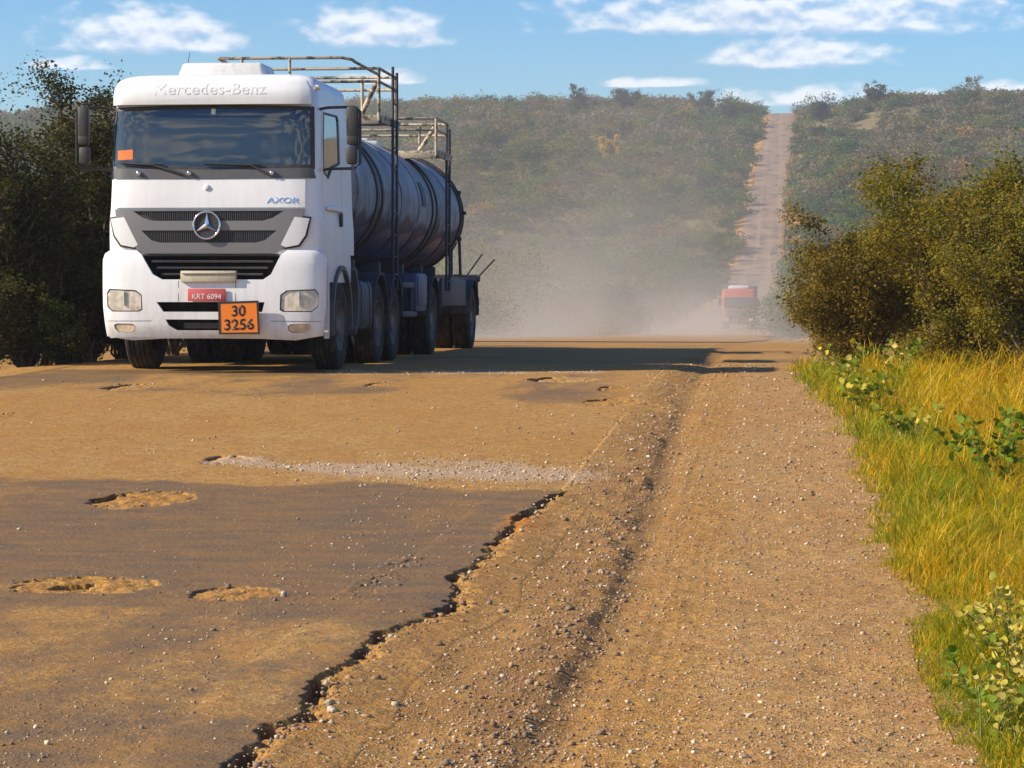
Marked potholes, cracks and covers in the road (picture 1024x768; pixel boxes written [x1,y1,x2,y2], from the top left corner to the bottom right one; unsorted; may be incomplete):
pothole [77,380,178,395]
pothole [579,383,650,395]
pothole [158,583,310,606]
pothole [0,574,190,600]
pothole [507,375,616,385]
pothole [563,396,671,411]
pothole [58,487,218,515]
crack [118,490,613,768]
